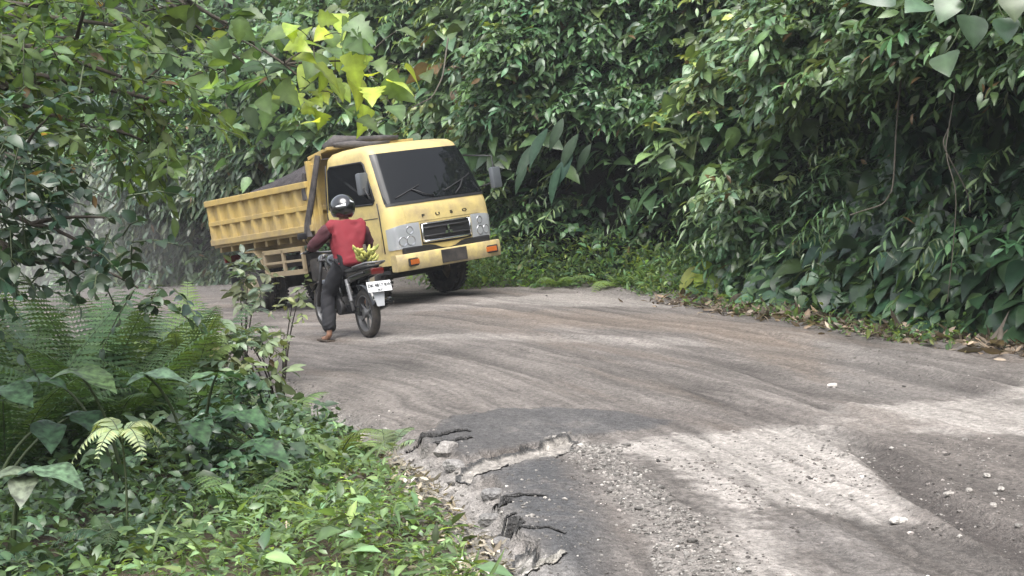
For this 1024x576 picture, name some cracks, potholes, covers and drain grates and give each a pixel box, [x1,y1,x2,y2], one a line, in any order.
pothole [455,433,578,485]
crack [491,492,567,576]
crack [404,428,473,453]
pothole [508,545,539,576]
